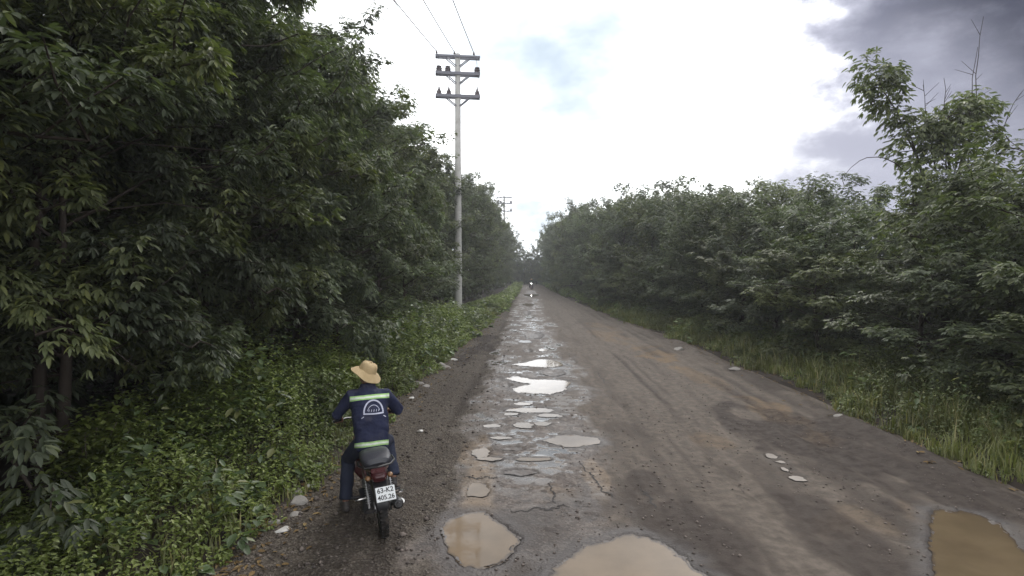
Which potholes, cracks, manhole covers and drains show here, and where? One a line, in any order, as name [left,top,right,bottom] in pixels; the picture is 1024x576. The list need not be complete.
pothole [440,511,522,570]
pothole [505,376,571,395]
crack [511,481,566,512]
pothole [467,483,490,497]
pothole [512,359,563,367]
crack [580,463,614,497]
pothole [928,509,1024,576]
pothole [541,433,600,447]
pothole [550,534,708,576]
pothole [471,448,490,458]
